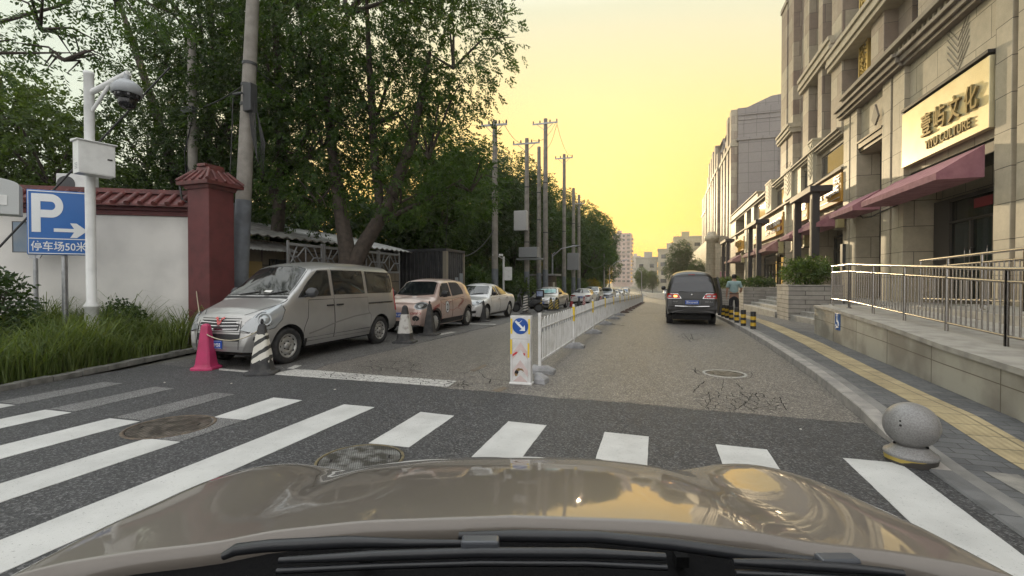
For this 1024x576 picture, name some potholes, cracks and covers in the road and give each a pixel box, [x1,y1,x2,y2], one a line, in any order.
manhole cover [314,444,404,470]
manhole cover [702,369,748,378]
crack [686,368,788,413]
manhole cover [119,415,217,440]
